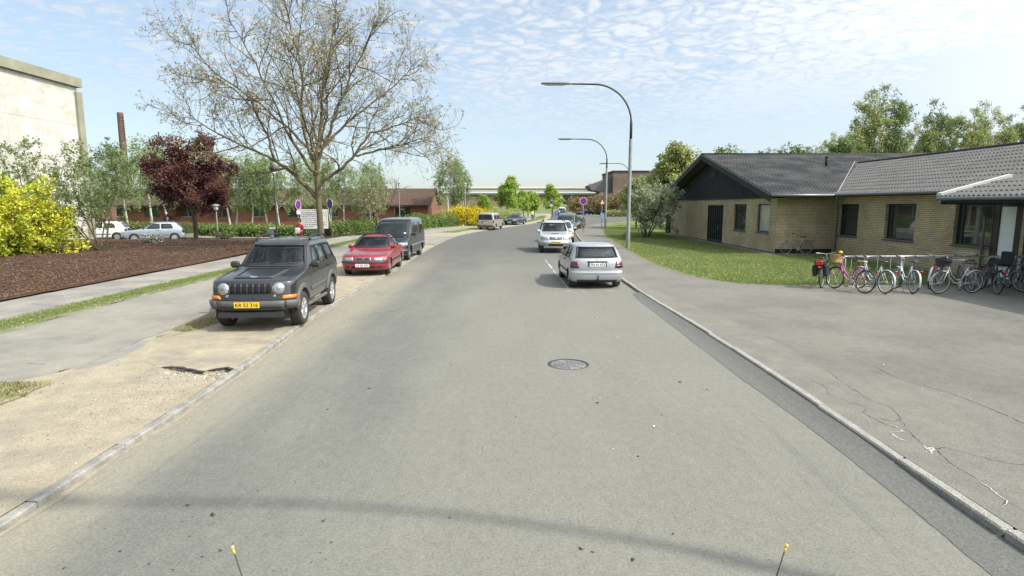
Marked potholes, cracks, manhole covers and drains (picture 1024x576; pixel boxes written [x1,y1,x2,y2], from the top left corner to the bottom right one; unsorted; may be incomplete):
manhole cover [548,359,589,370]
pothole [155,366,234,382]
crack [816,373,1023,510]
